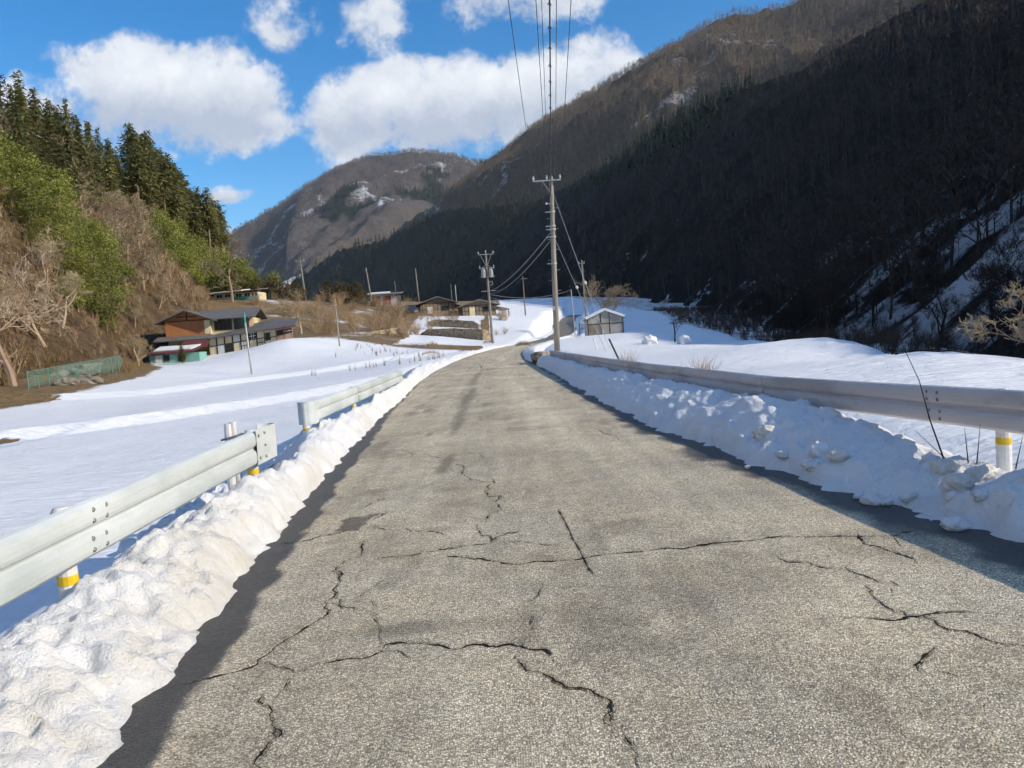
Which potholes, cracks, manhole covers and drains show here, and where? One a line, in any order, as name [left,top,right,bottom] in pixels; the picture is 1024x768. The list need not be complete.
crack [778,558,1023,676]
crack [186,453,637,768]
